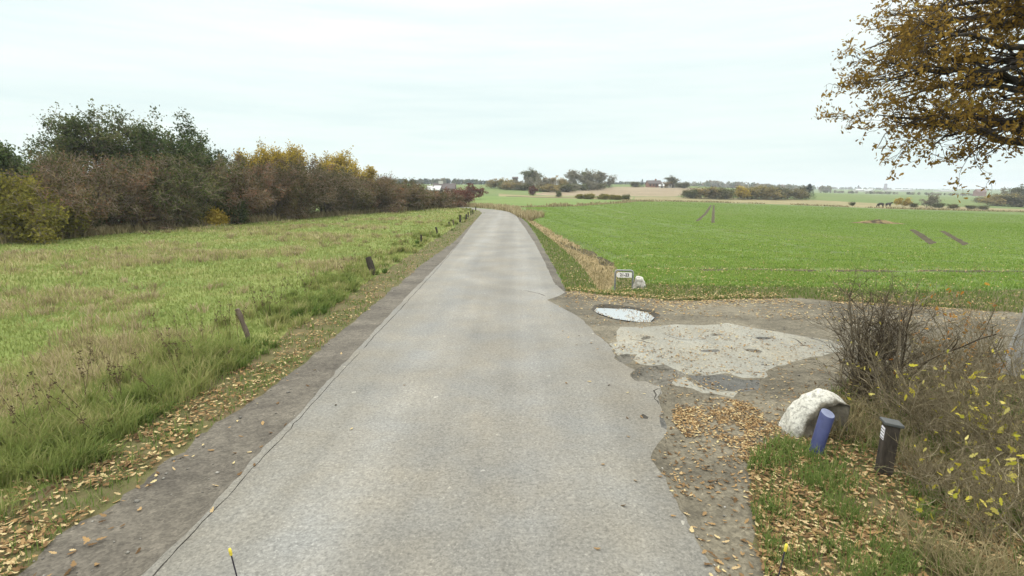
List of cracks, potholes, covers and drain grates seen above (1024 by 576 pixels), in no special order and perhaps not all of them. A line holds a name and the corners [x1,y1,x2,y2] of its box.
pothole [591,304,660,322]
